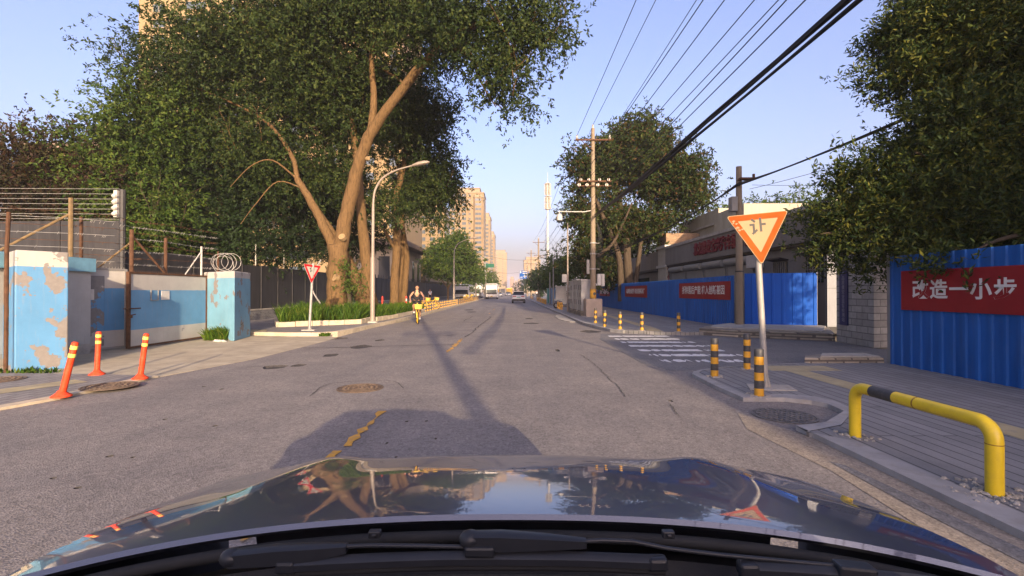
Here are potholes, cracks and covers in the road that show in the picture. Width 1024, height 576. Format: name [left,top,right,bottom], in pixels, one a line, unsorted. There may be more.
manhole cover [336,383,384,393]
manhole cover [751,408,819,424]
manhole cover [78,381,141,391]
